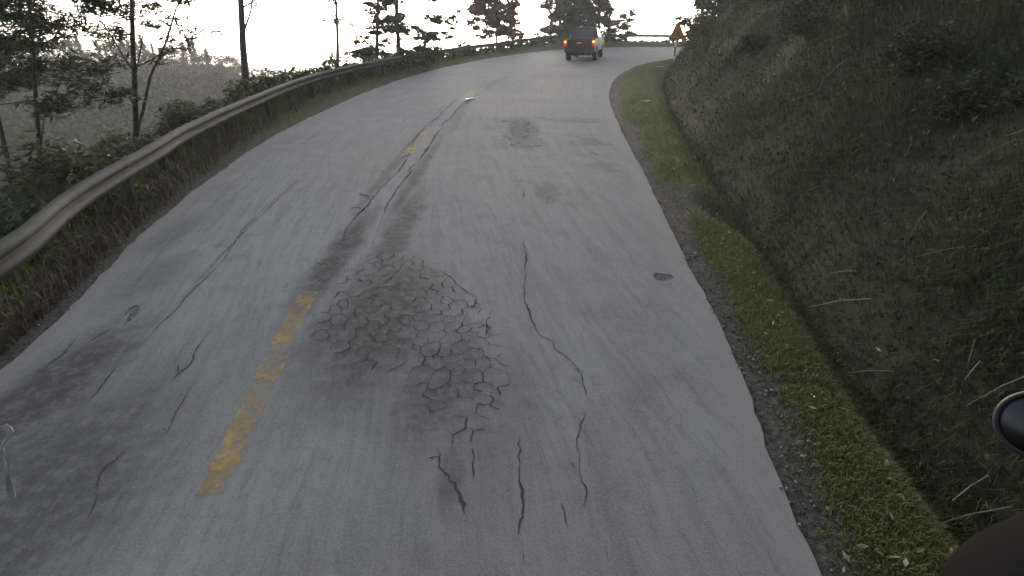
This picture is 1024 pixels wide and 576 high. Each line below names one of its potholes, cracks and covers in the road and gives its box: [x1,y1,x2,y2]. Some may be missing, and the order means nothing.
crack [311,252,510,514]
crack [561,411,588,527]
crack [87,449,126,518]
pothole [653,272,674,282]
crack [517,436,530,534]
crack [161,329,215,434]
pothole [118,304,140,328]
crack [522,240,589,399]
